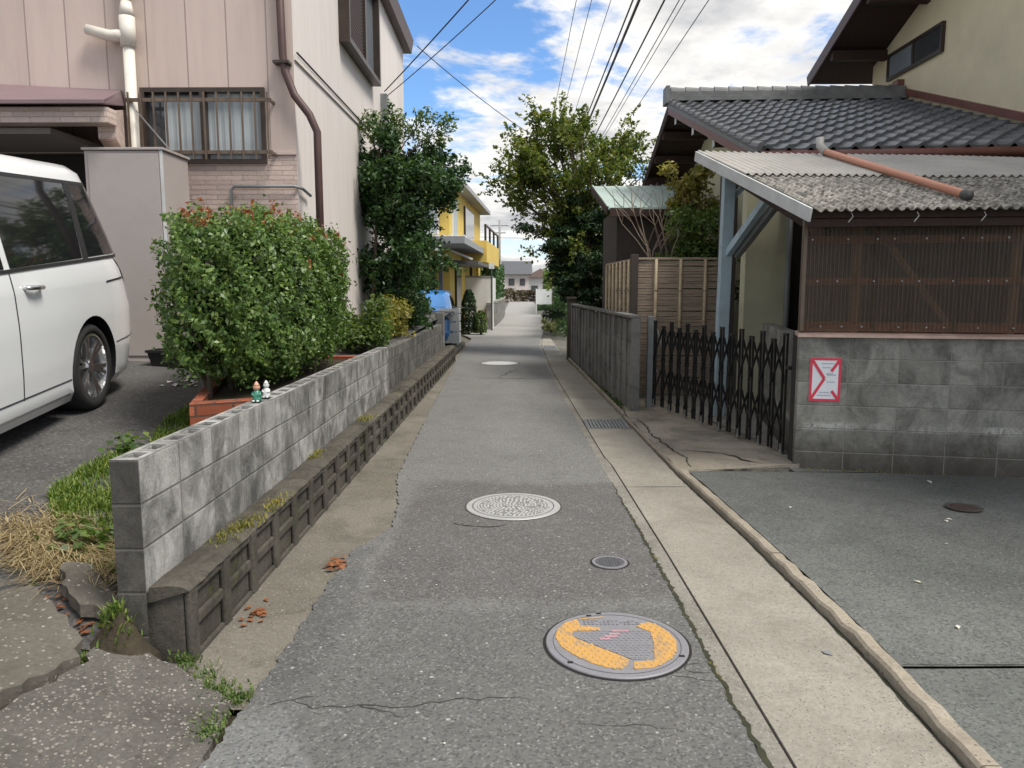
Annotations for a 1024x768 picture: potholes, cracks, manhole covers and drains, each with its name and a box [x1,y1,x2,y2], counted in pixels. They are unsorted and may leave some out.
manhole cover [590,556,630,570]
manhole cover [944,502,984,513]
drain grate [583,419,630,430]
manhole cover [465,493,562,521]
manhole cover [543,612,692,681]
crack [237,696,529,717]
